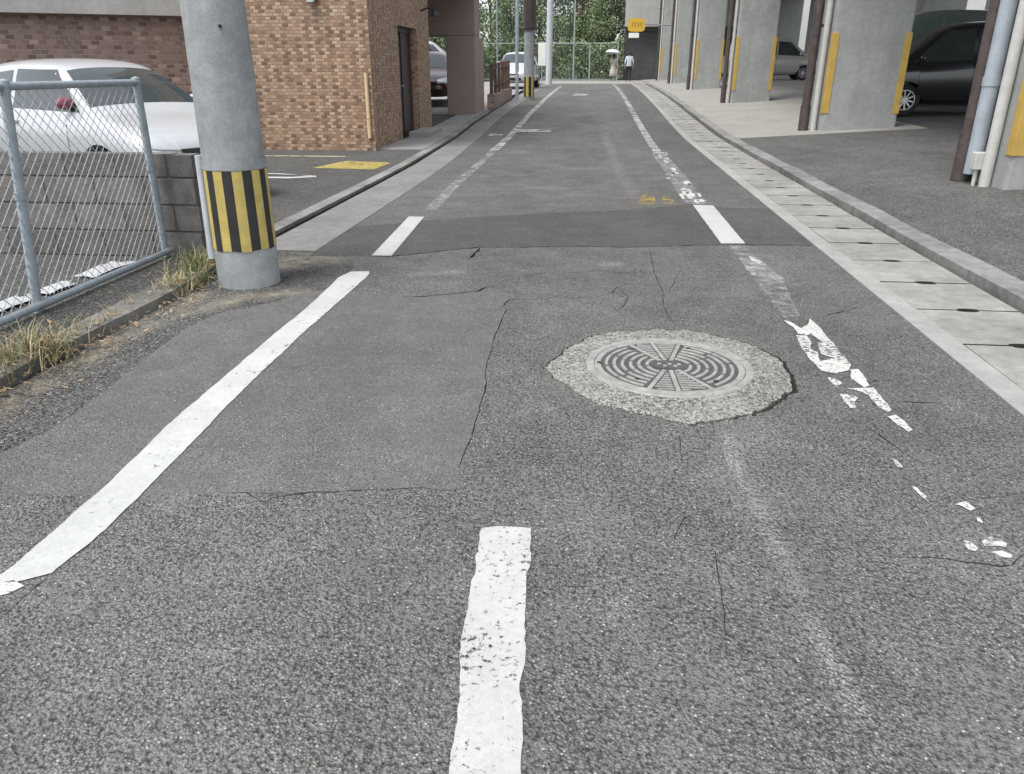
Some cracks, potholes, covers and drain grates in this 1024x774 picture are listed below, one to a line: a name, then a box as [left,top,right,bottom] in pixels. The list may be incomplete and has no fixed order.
crack [380,244,809,322]
crack [890,554,1024,567]
manhole cover [543,328,798,426]
crack [715,551,727,635]
